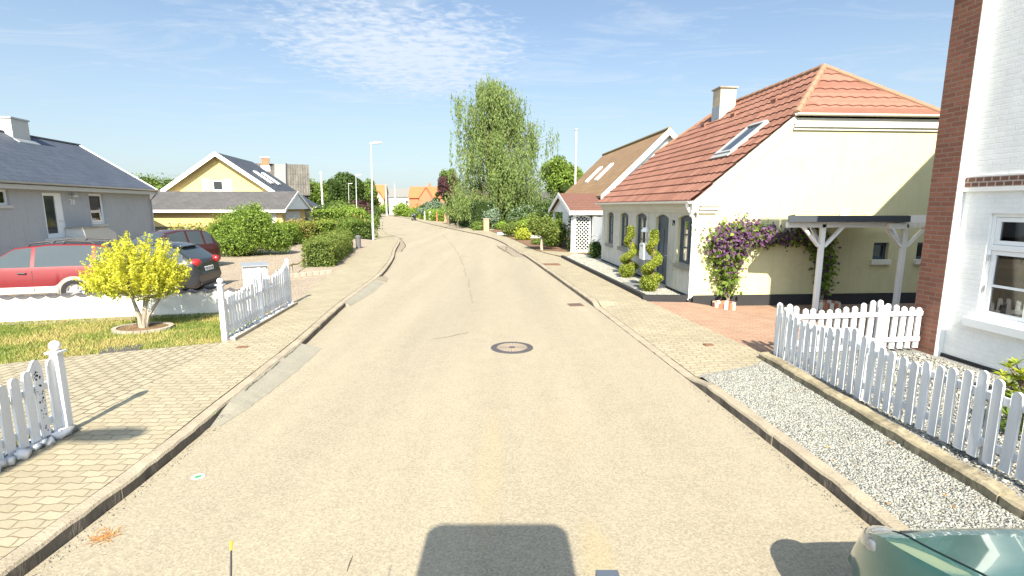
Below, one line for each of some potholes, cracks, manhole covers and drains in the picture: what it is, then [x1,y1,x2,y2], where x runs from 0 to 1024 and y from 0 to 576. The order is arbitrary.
manhole cover [491,342,533,354]
